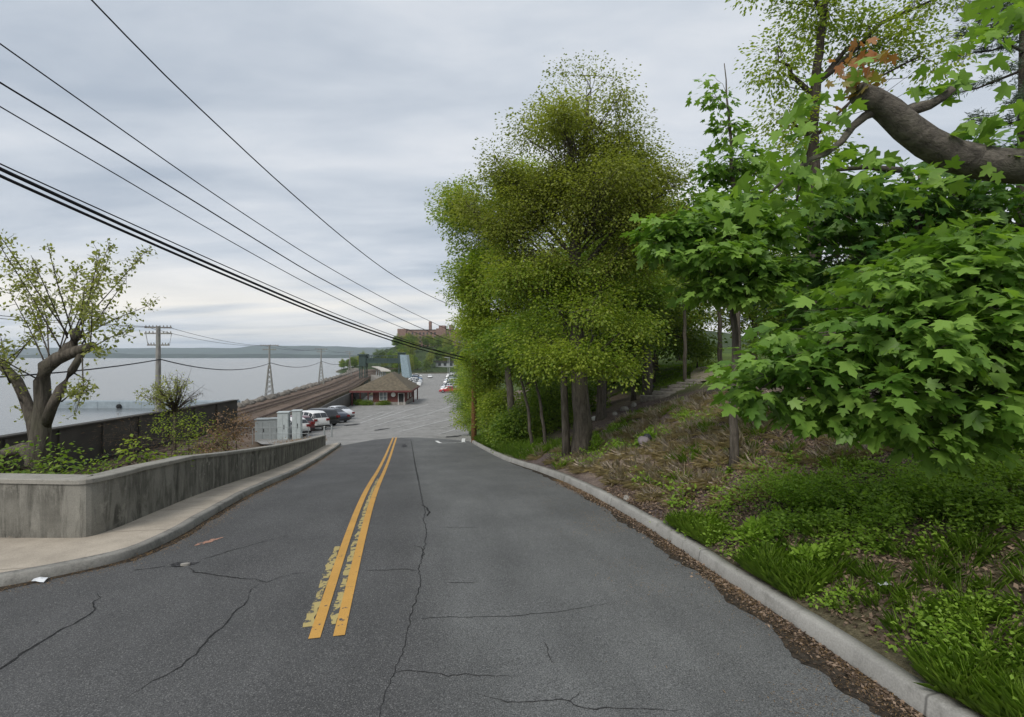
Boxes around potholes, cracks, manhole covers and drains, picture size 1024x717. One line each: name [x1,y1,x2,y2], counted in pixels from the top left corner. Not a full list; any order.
crack [379,439,614,716]
crack [122,536,294,701]
crack [0,593,101,669]
crack [478,693,680,711]
